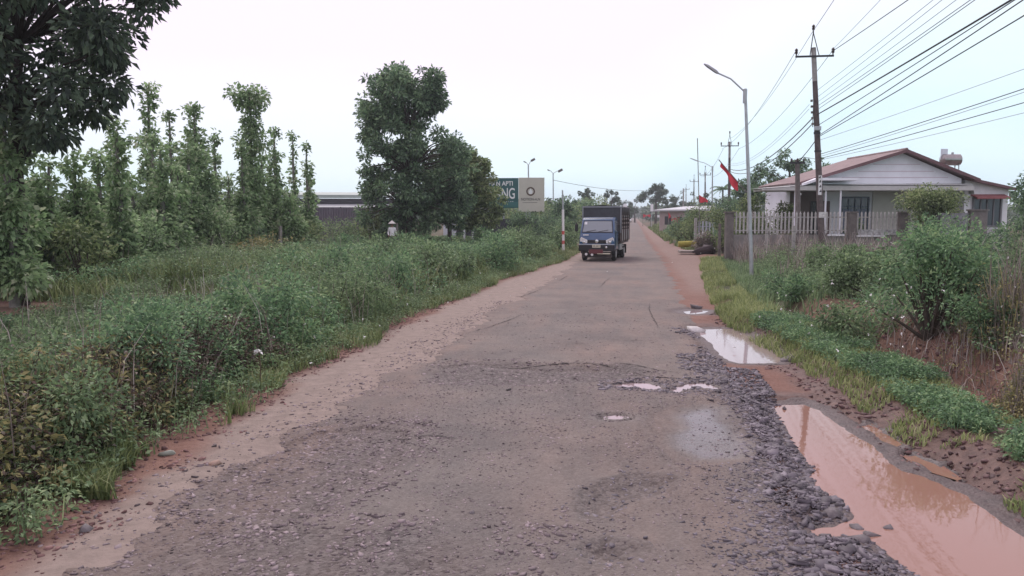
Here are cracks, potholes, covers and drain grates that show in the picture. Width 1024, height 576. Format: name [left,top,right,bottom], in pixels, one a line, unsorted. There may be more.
pothole [428,359,659,386]
pothole [653,401,761,466]
pothole [663,380,726,395]
pothole [604,380,674,391]
pothole [691,325,791,365]
